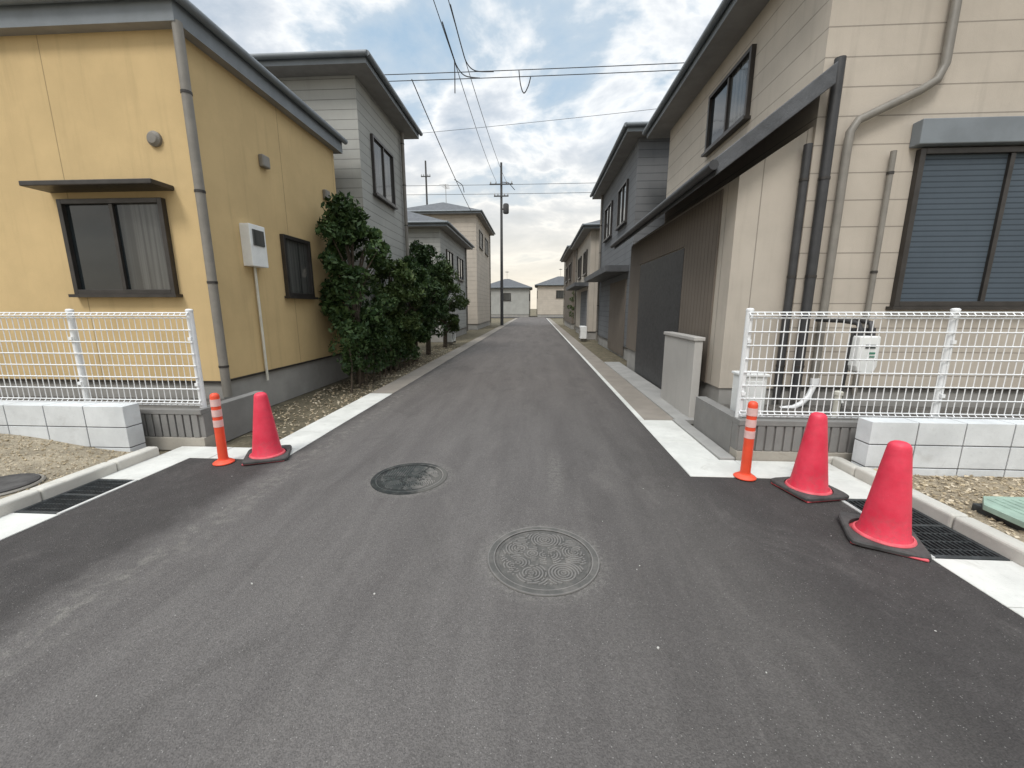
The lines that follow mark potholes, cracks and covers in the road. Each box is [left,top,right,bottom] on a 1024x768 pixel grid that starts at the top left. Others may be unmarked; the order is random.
drain grate [840,499,1010,561]
manhole cover [487,526,600,597]
drain grate [14,479,138,515]
manhole cover [370,463,448,495]
utility cover [971,496,1024,531]
